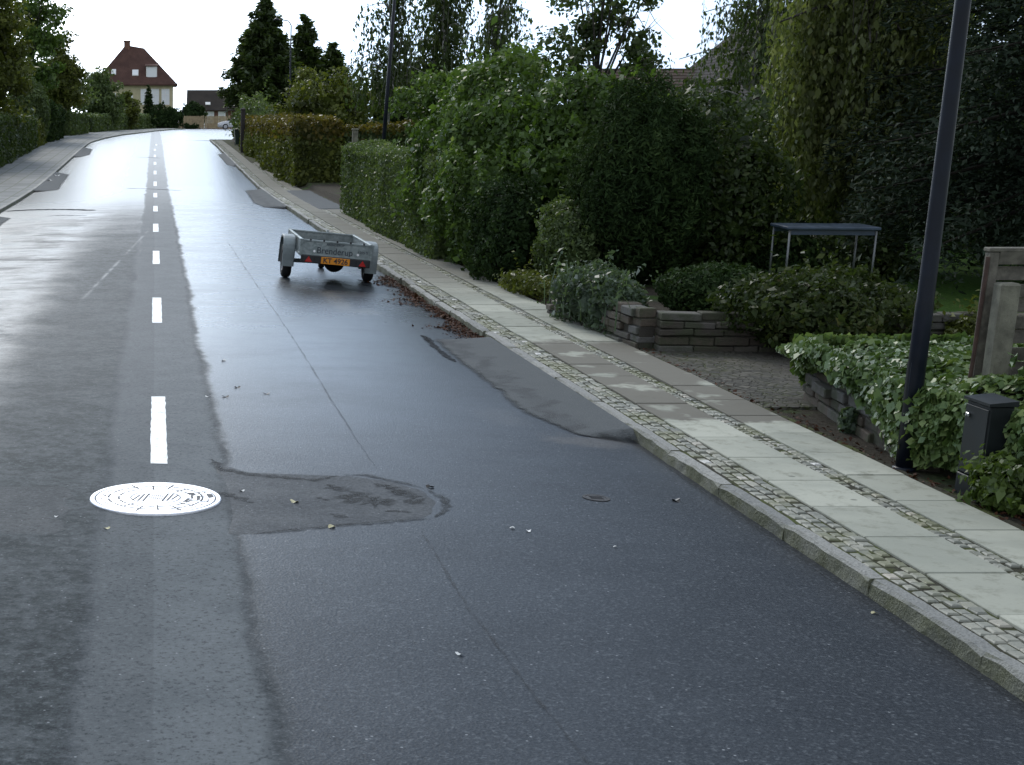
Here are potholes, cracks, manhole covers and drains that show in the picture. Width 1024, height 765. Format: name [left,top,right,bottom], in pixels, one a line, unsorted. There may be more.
manhole cover [90,482,221,516]
